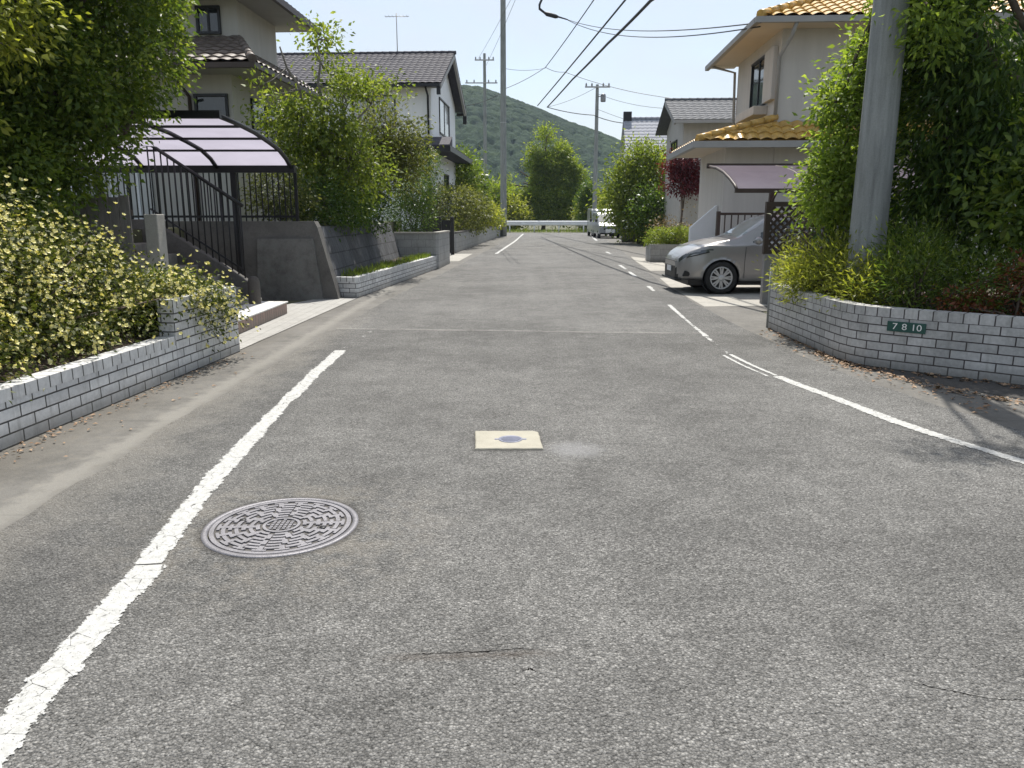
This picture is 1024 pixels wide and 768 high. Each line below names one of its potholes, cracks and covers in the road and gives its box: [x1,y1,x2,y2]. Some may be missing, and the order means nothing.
manhole cover [475,431,543,450]
crack [398,648,539,672]
manhole cover [201,498,359,558]
crack [911,681,1024,701]
